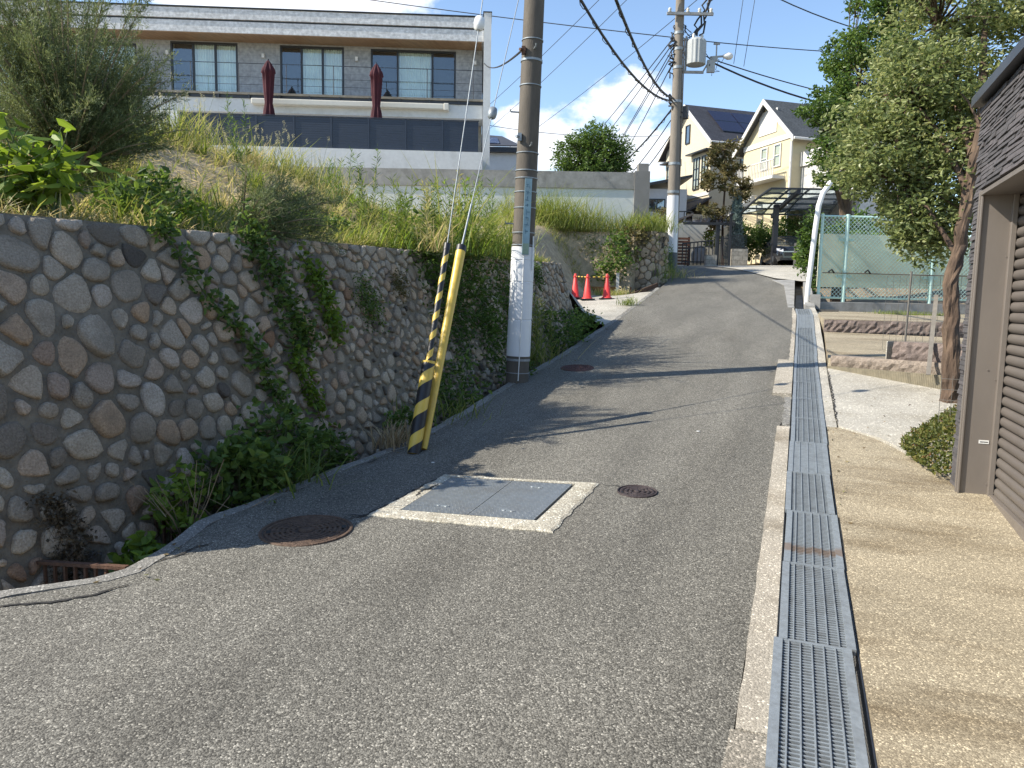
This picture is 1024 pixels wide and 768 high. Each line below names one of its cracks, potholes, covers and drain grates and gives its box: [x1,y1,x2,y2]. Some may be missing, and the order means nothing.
drain grate [794,355,818,368]
manhole cover [617,485,658,498]
utility cover [367,474,599,533]
drain grate [792,381,822,400]
drain grate [795,344,817,356]
drain grate [788,441,830,475]
drain grate [791,417,828,444]
manhole cover [258,515,353,547]
drain grate [783,510,844,569]
drain grate [765,636,869,768]
drain grate [779,561,856,656]
drain grate [795,335,816,346]
